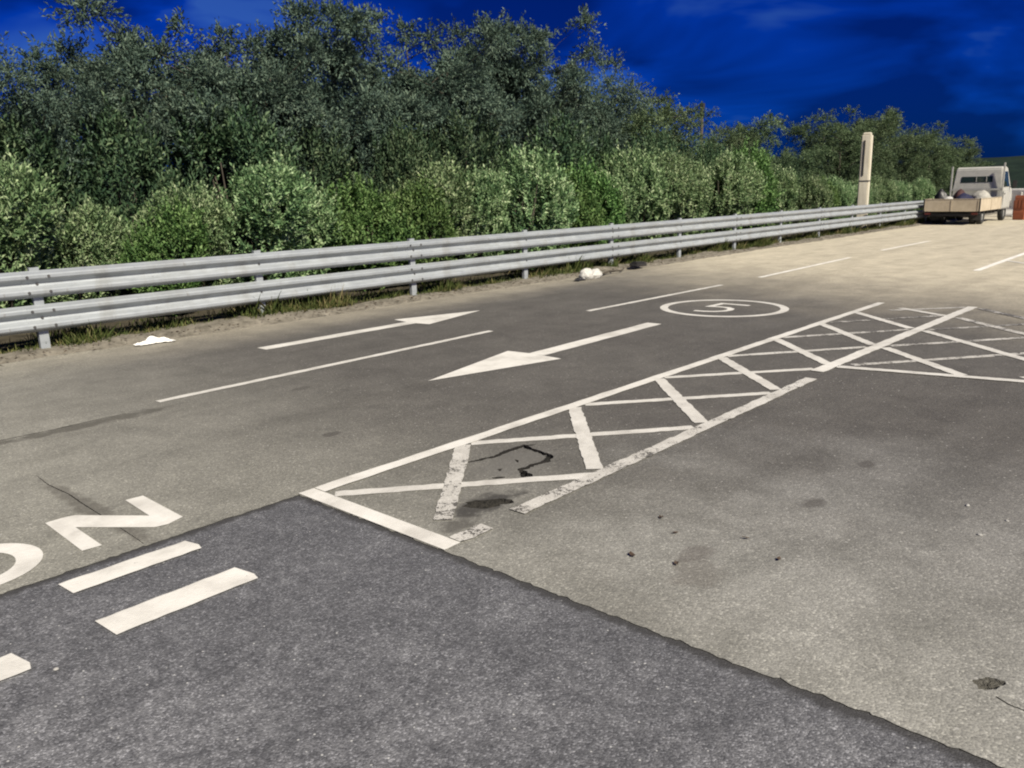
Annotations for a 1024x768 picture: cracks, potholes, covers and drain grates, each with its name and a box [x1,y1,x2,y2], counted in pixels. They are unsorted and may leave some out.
crack [468,444,554,479]
pothole [972,677,1006,690]
crack [36,475,144,544]
